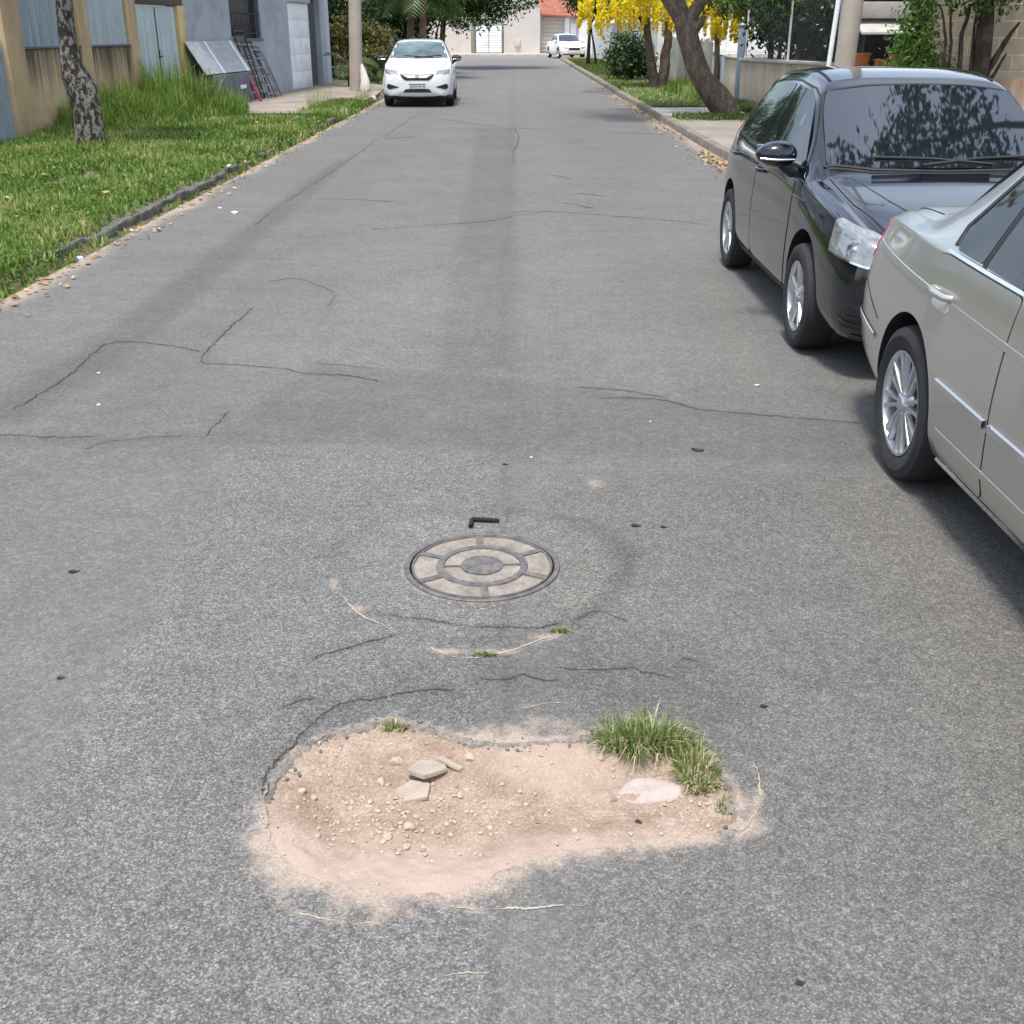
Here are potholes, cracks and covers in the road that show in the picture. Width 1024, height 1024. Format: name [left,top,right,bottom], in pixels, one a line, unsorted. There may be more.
crack [259,688,454,829]
crack [373,175,707,229]
crack [481,667,673,681]
manhole cover [404,533,560,603]
crack [584,387,856,423]
crack [447,119,680,163]
pothole [262,716,739,894]
crack [13,308,375,409]
crack [255,117,413,224]
crack [312,578,559,660]
crack [0,434,168,449]
